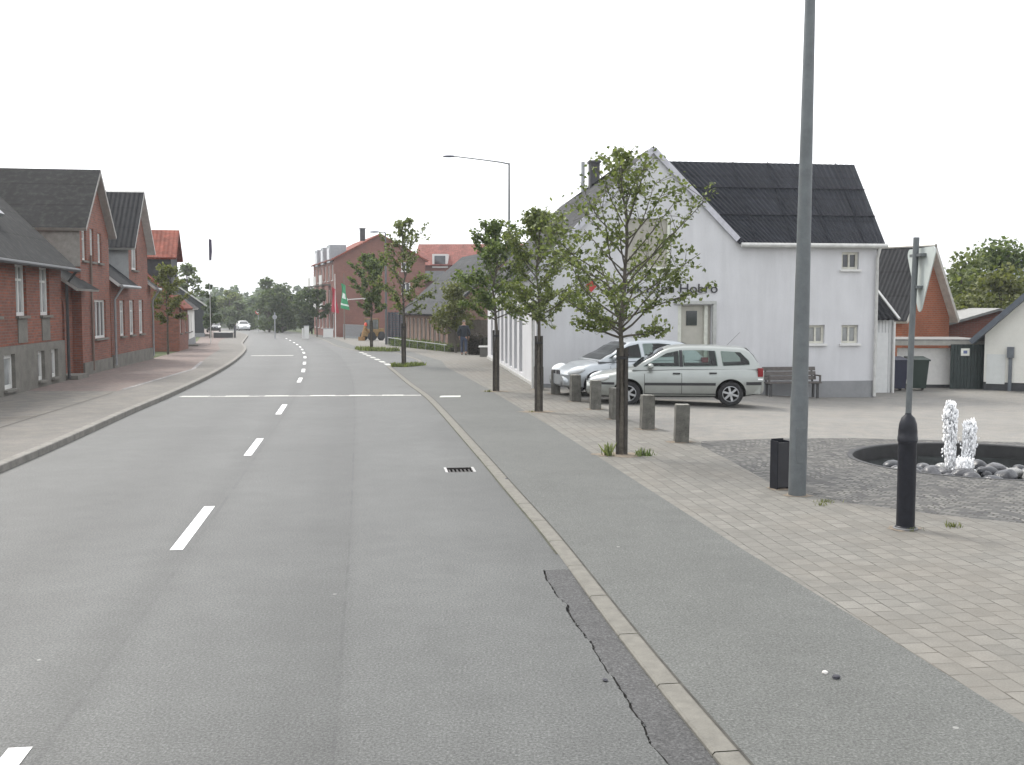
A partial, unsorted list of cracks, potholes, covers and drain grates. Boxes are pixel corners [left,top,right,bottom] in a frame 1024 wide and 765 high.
crack [544,573,669,765]
